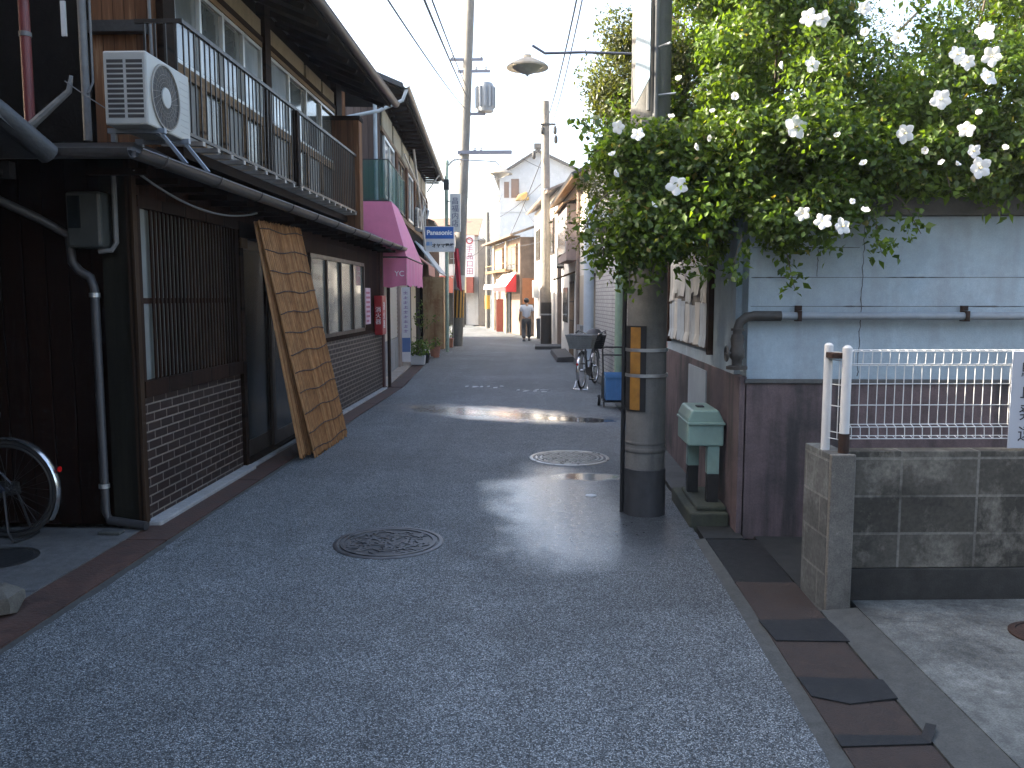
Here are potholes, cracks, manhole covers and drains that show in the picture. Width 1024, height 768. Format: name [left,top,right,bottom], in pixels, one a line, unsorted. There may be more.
manhole cover [530,450,609,466]
manhole cover [1008,621,1024,641]
manhole cover [333,527,443,559]
